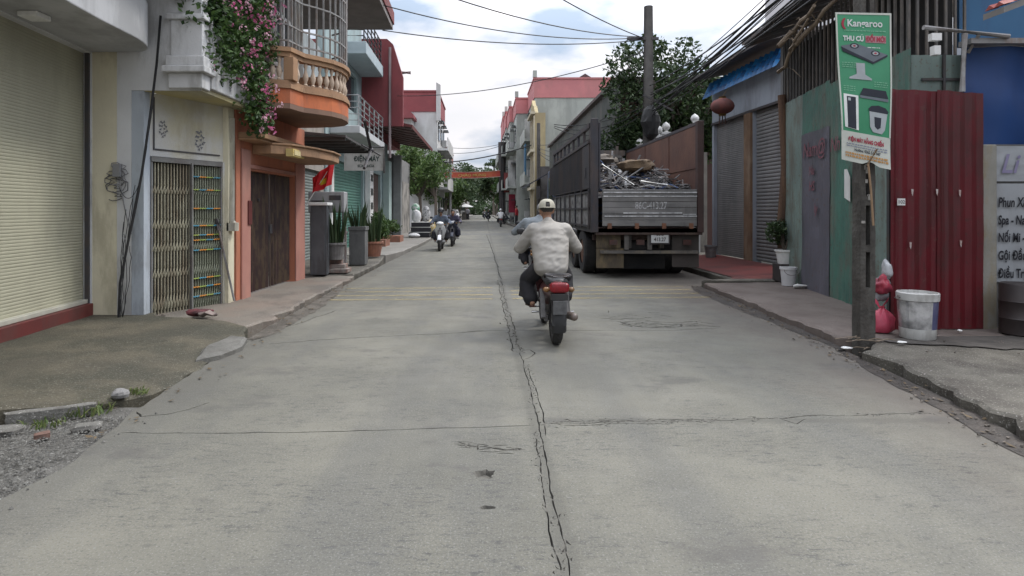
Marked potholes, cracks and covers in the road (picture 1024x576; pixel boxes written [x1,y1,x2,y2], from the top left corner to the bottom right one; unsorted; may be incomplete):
pothole [472,469,495,479]
